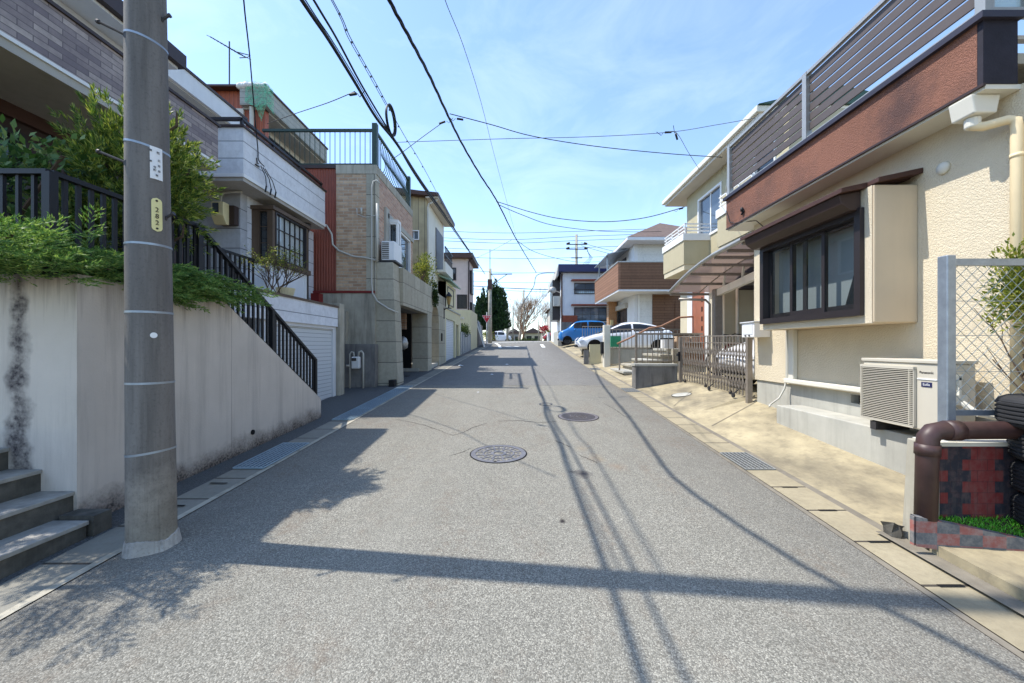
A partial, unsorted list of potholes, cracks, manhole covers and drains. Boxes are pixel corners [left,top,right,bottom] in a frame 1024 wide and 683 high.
manhole cover [558,412,599,421]
manhole cover [470,445,527,463]
drain grate [232,442,309,469]
drain grate [720,452,776,470]
